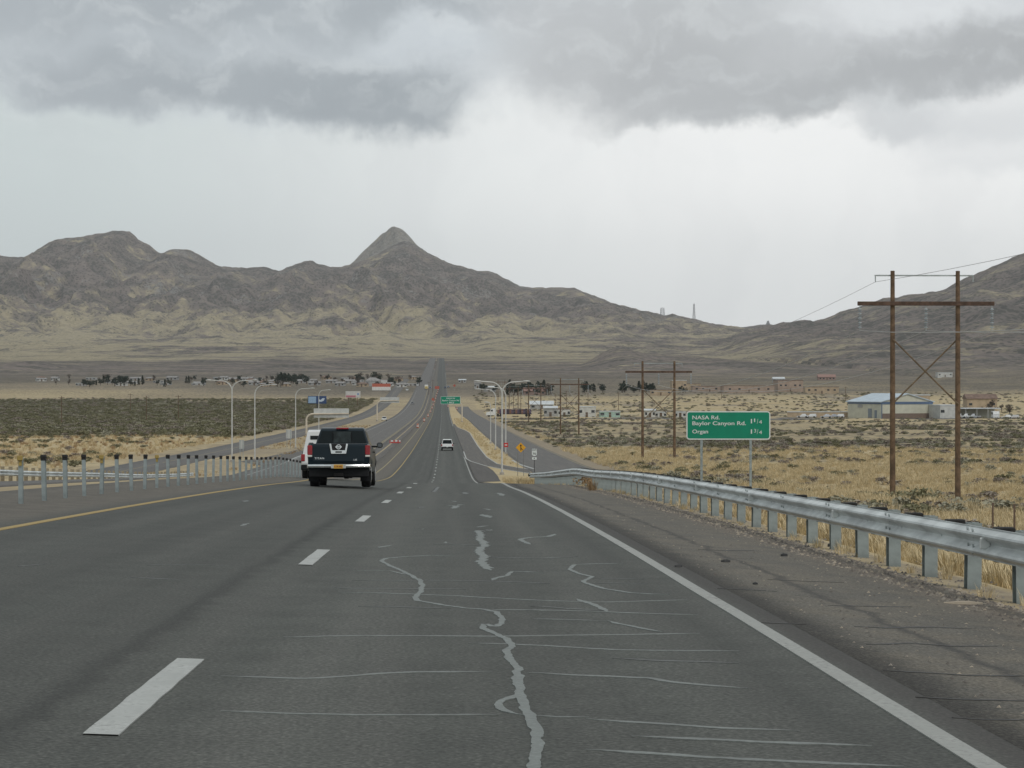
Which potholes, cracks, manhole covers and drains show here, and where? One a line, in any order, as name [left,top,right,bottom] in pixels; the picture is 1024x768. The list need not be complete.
crack [339,542,688,611]
